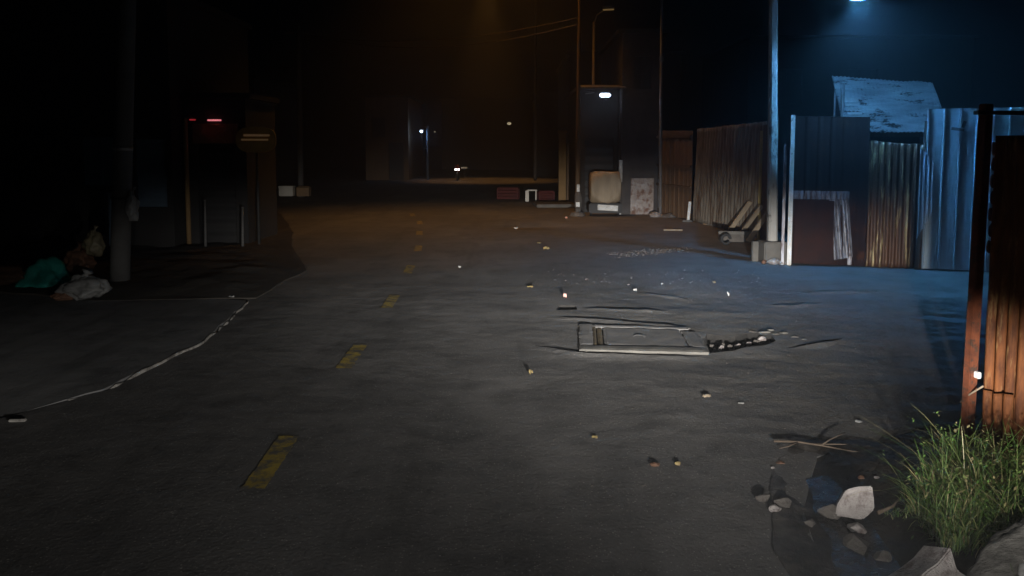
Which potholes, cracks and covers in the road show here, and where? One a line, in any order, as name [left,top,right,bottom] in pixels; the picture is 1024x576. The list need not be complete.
pothole [704,333,776,353]
crack [788,338,842,348]
crack [574,292,691,326]
manhole cover [579,324,709,355]
